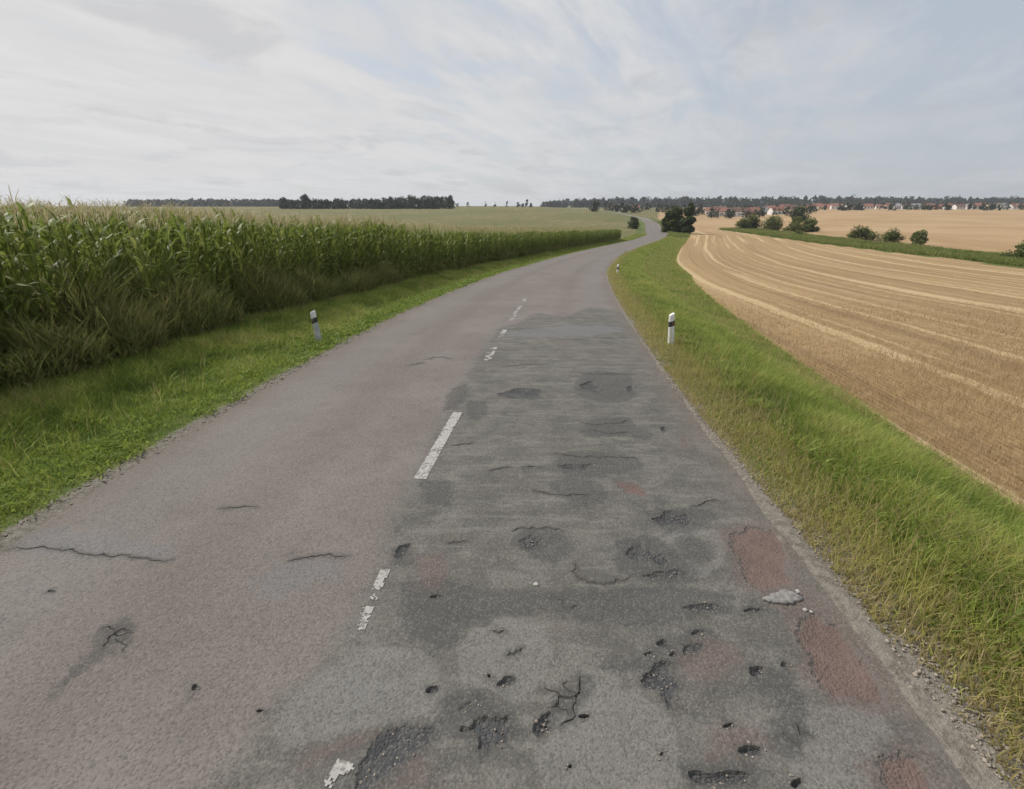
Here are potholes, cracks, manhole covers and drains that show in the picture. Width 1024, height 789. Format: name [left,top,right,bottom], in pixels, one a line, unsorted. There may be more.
crack [557,563,629,610]
crack [17,546,174,561]
pothole [518,535,546,551]
crack [290,553,345,561]
crack [545,677,582,727]
pothole [640,660,682,710]
pothole [688,770,751,785]
pothole [393,543,412,560]
pothole [499,388,544,399]
pothole [354,724,436,789]
crack [103,626,129,652]
